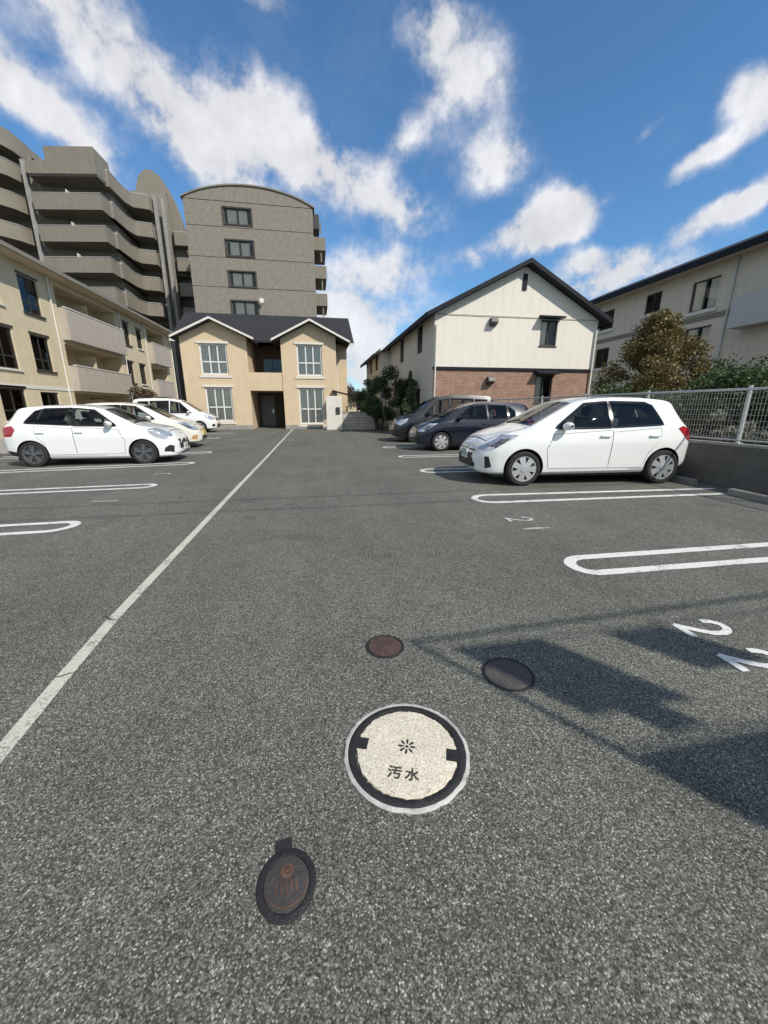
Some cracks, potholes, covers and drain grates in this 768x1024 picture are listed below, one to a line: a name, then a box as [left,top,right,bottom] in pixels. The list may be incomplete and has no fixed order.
manhole cover [256,837,316,925]
manhole cover [482,657,535,692]
manhole cover [343,703,470,815]
manhole cover [365,635,404,659]
